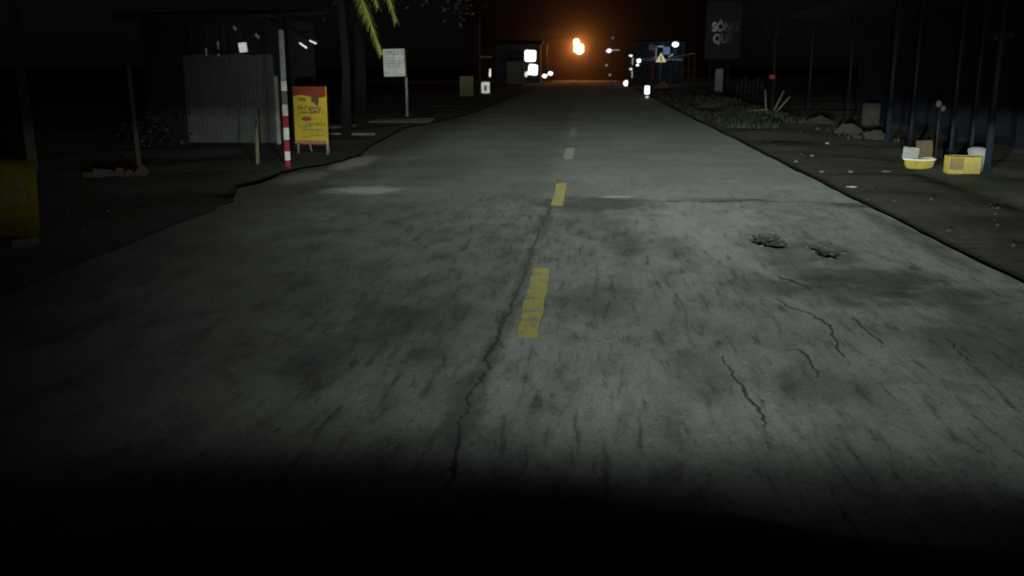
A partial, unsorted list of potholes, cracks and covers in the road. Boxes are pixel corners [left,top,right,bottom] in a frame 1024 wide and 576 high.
pothole [806,244,847,259]
pothole [747,232,790,249]
crack [722,276,884,428]
crack [941,337,970,362]
